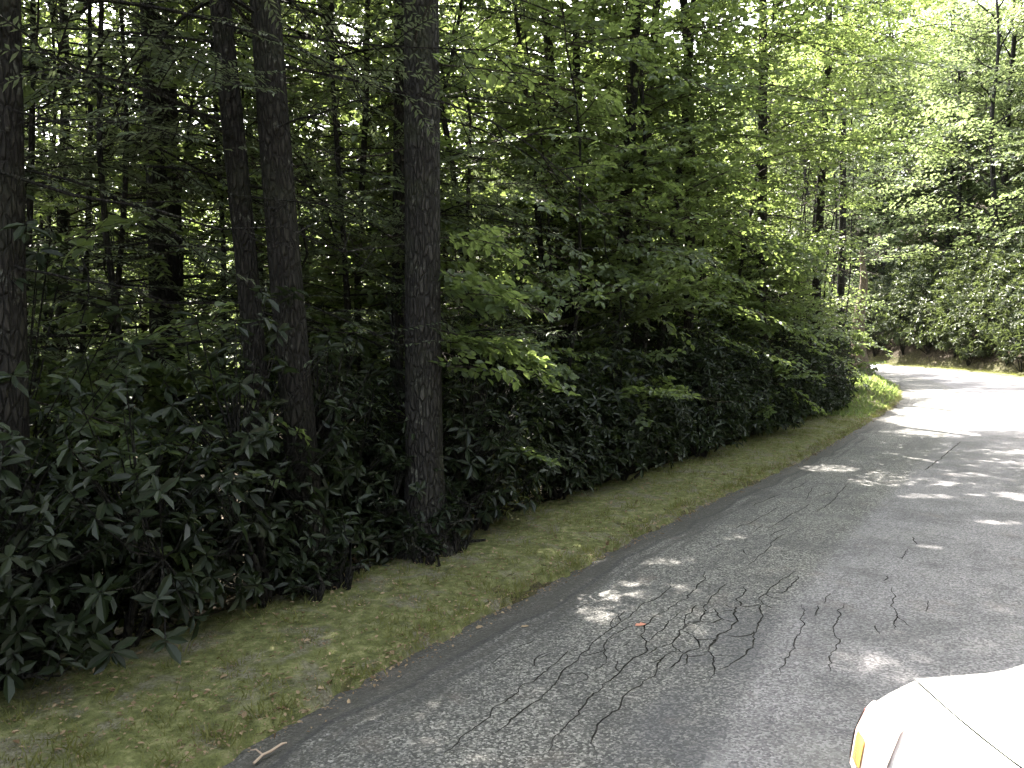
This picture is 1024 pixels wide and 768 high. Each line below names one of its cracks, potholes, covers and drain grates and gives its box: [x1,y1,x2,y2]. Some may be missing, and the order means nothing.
crack [716,484,847,563]
crack [443,571,799,755]
crack [874,537,917,634]
crack [814,594,844,671]
